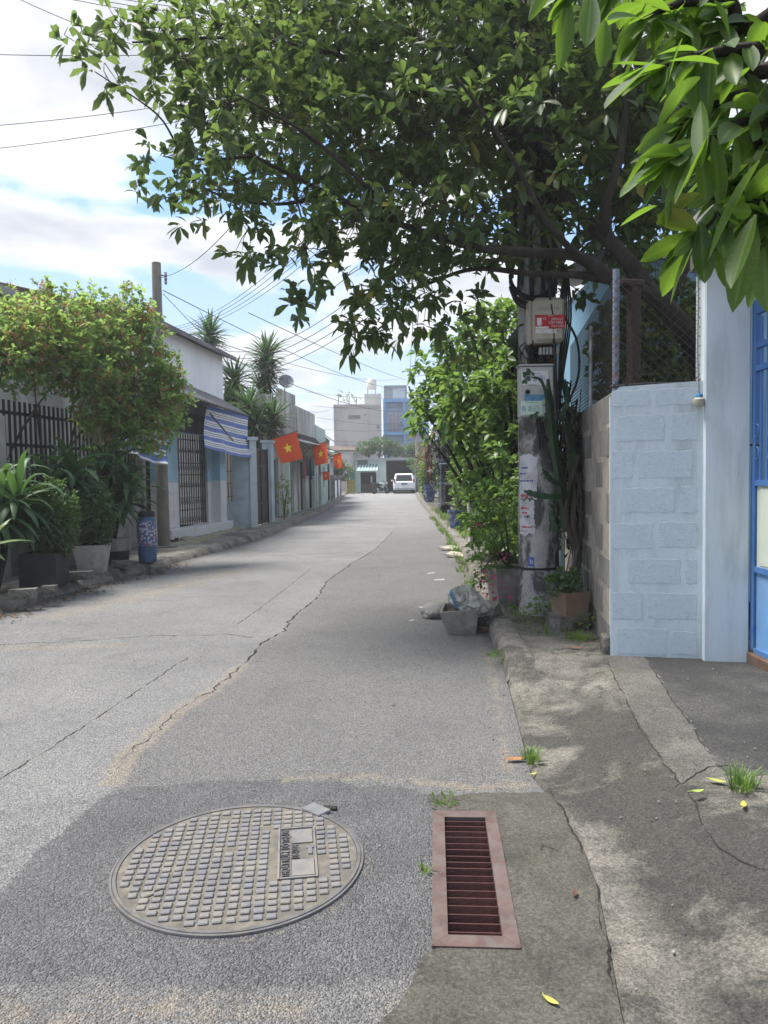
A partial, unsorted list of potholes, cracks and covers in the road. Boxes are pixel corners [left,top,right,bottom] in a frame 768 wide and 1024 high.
crack [604,657,765,869]
crack [549,790,625,1022]
manhole cover [108,802,364,939]
crack [0,523,407,780]
drain grate [432,810,521,950]
